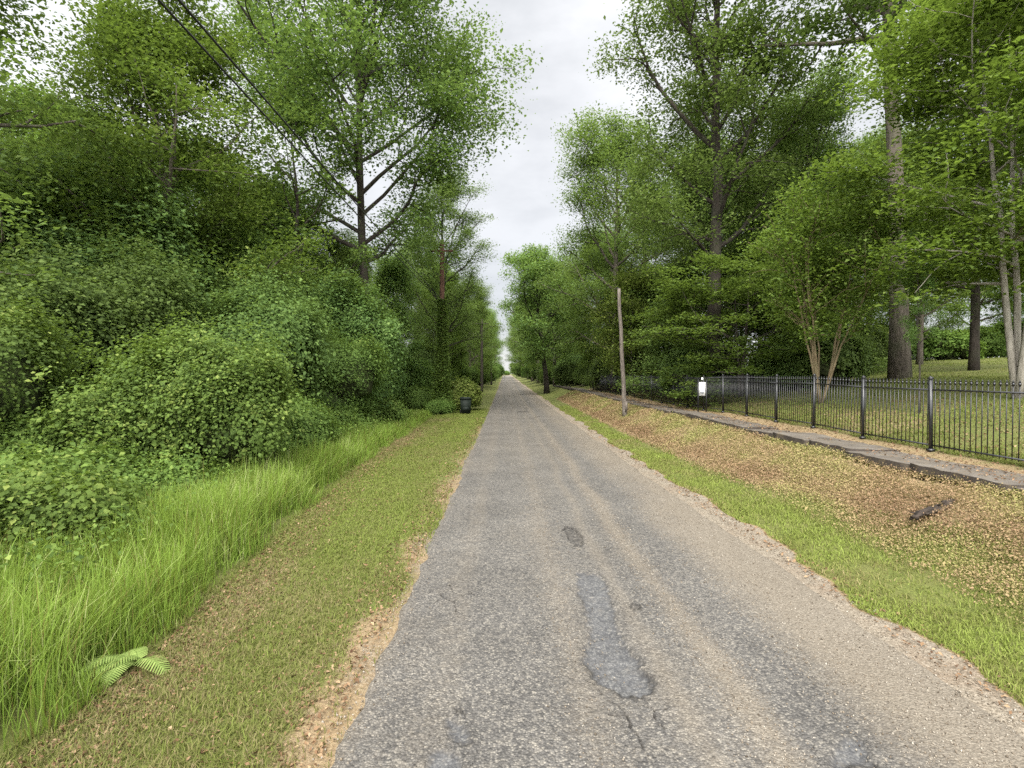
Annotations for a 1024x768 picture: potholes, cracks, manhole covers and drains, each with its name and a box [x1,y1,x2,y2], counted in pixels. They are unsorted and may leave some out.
pothole [558,525,590,550]
crack [587,685,683,761]
